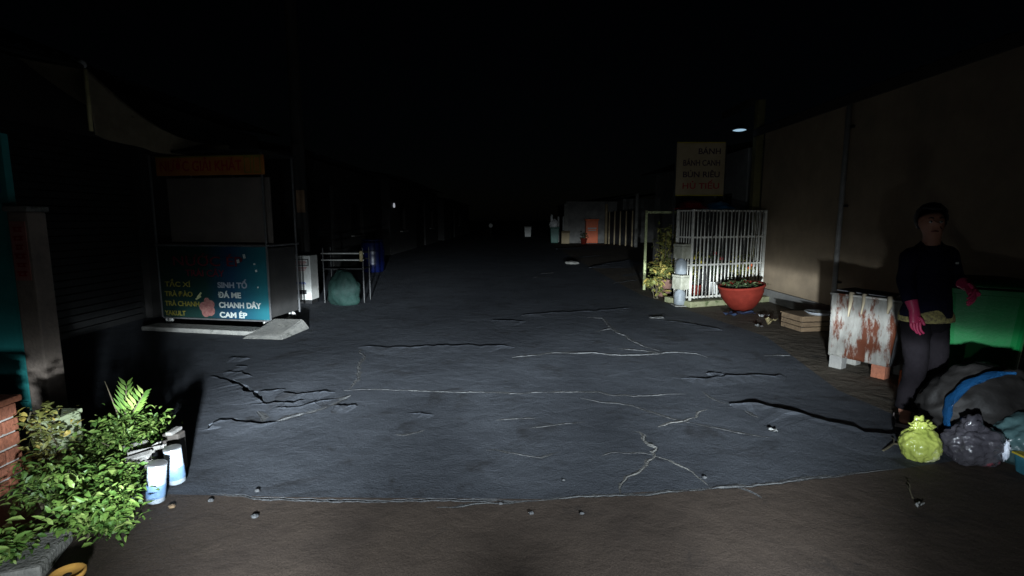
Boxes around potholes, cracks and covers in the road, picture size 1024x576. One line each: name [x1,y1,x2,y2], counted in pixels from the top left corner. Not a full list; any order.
crack [195,308,905,494]
